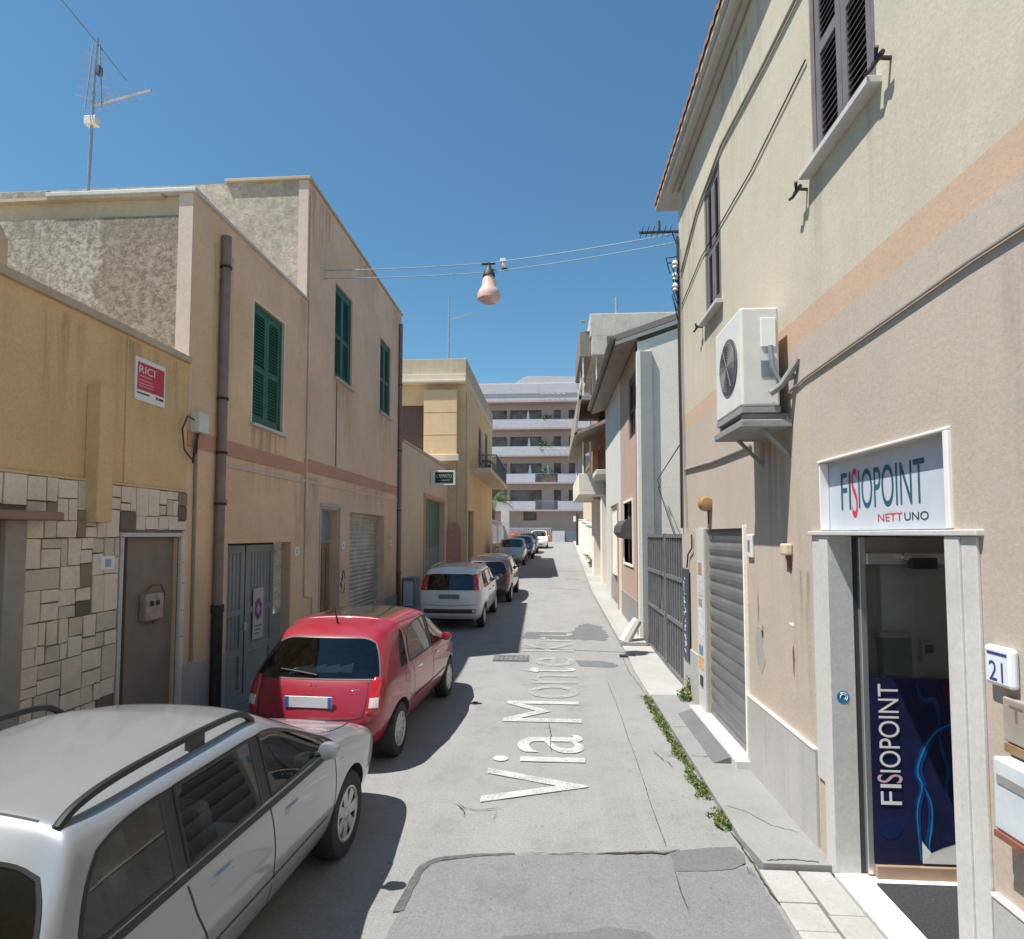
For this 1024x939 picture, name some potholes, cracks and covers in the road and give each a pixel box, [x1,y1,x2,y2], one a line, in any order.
crack [607,681,702,914]
